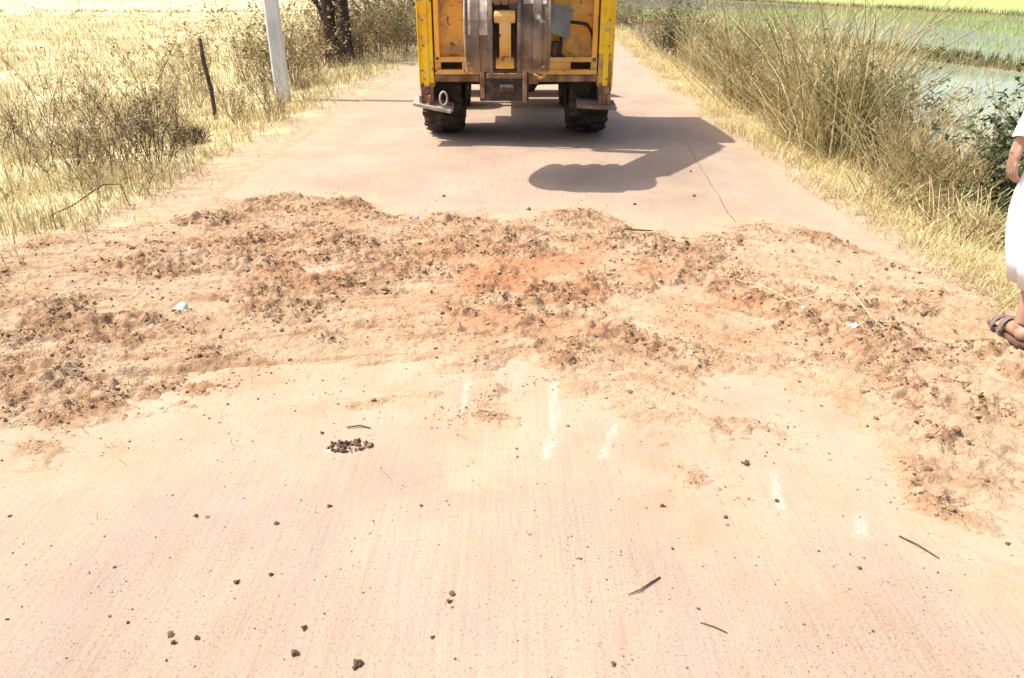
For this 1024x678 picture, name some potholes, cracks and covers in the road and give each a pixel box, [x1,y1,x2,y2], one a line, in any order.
crack [686,141,737,223]
